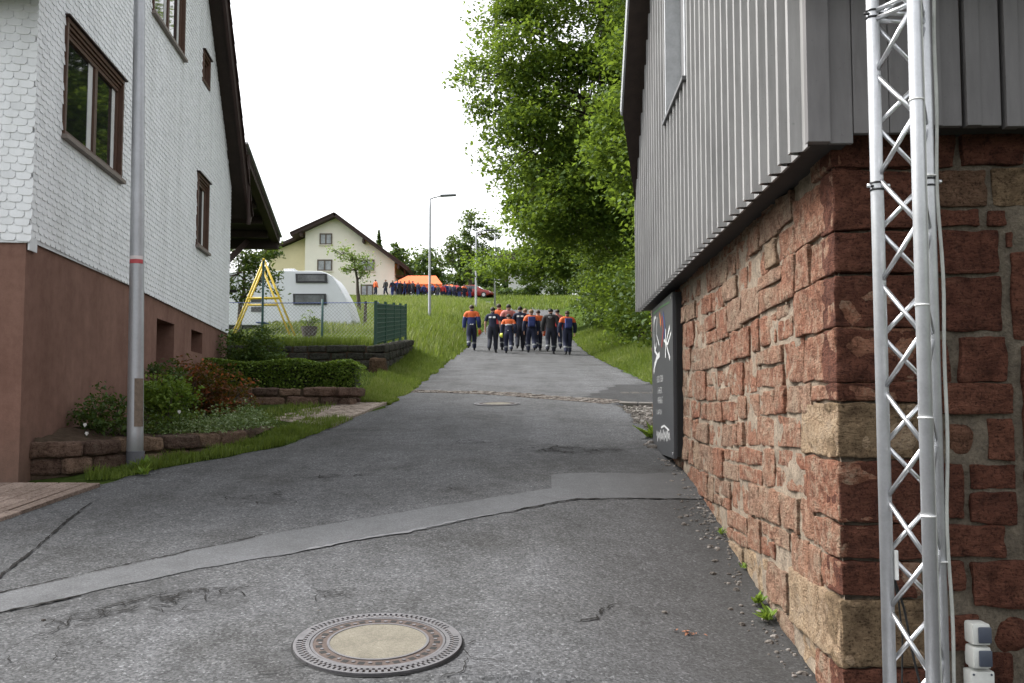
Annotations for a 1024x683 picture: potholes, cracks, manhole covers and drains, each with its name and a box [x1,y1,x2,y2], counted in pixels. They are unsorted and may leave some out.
manhole cover [290,613,464,677]
crack [576,602,622,622]
crack [7,581,249,662]
crack [438,639,518,678]
